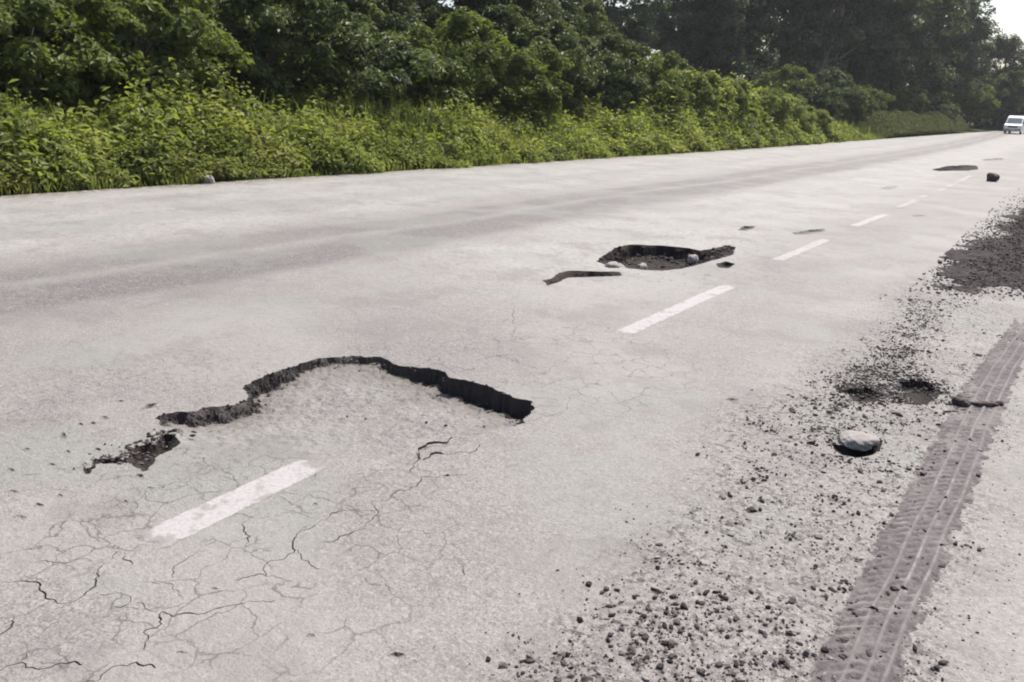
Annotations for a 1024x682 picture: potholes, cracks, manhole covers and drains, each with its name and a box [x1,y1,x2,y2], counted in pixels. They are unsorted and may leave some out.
pothole [155,356,535,469]
pothole [597,244,736,271]
crack [0,551,275,682]
crack [239,437,480,581]
pothole [73,453,124,474]
pothole [101,422,217,472]
pothole [813,377,901,406]
pothole [866,371,956,405]
pothole [542,271,621,286]
